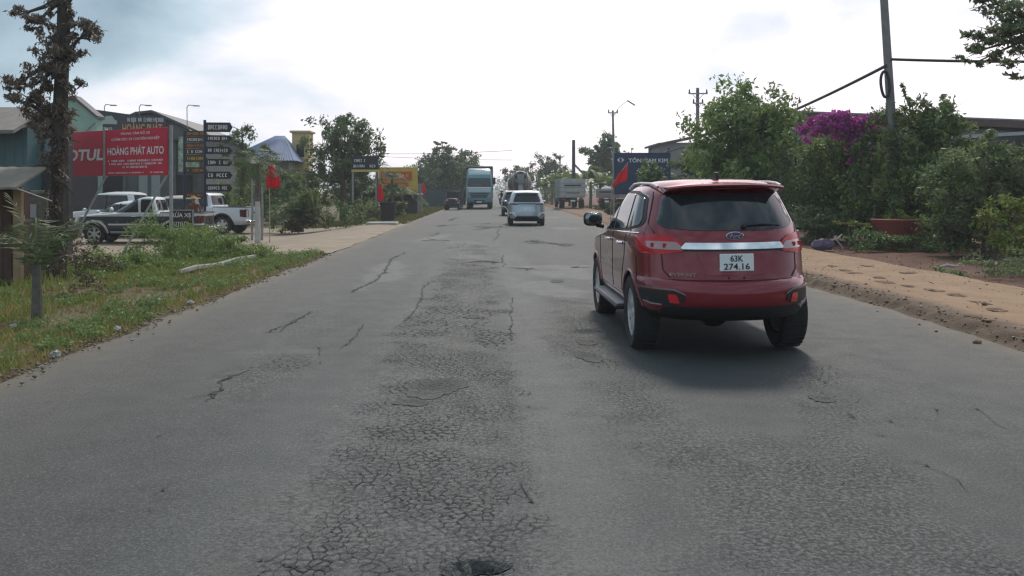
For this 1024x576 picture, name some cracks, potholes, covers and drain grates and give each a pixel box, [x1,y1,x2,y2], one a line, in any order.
crack [265,311,320,333]
pothole [404,377,469,400]
crack [186,346,324,402]
pothole [440,559,513,576]
crack [333,218,560,446]
crack [238,440,578,576]
